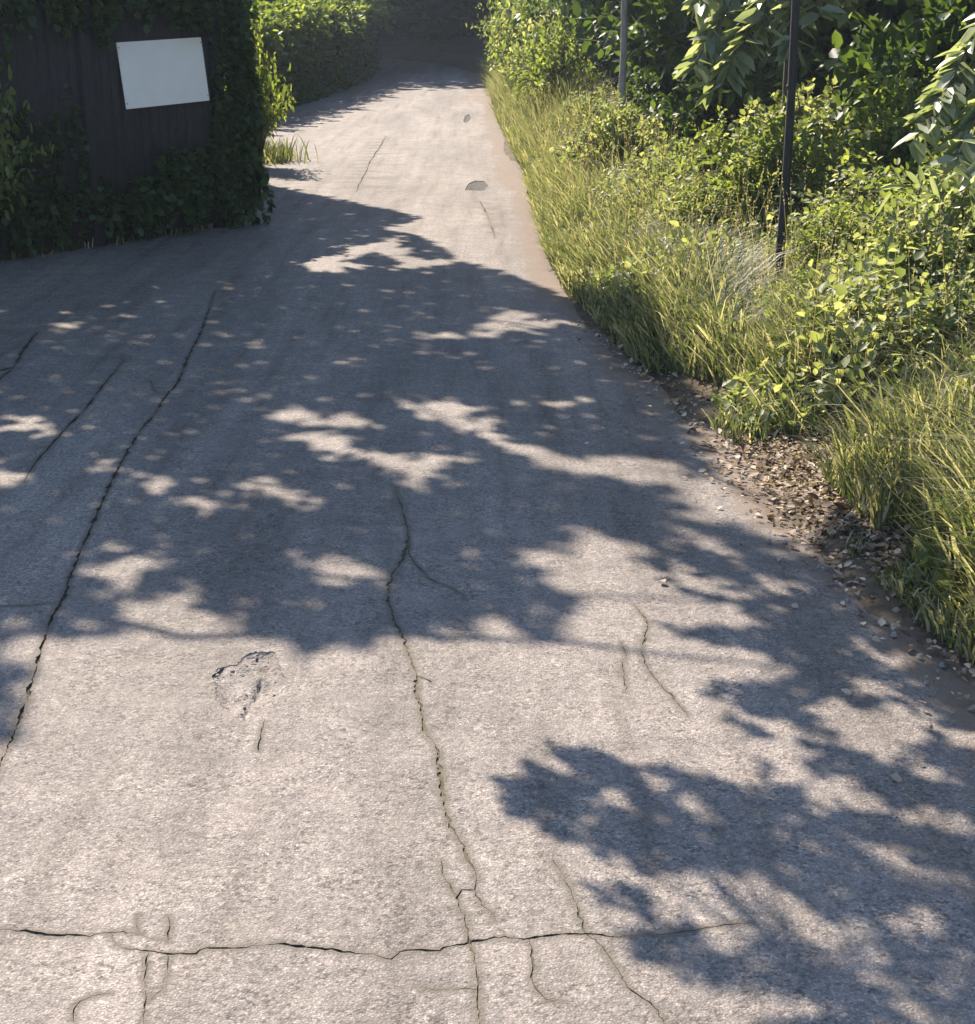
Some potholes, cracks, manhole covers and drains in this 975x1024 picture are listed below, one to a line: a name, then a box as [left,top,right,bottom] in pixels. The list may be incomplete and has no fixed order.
crack [0,486,749,1024]
pothole [465,180,488,191]
pothole [208,648,292,750]
crack [24,358,125,483]
crack [0,333,37,379]
